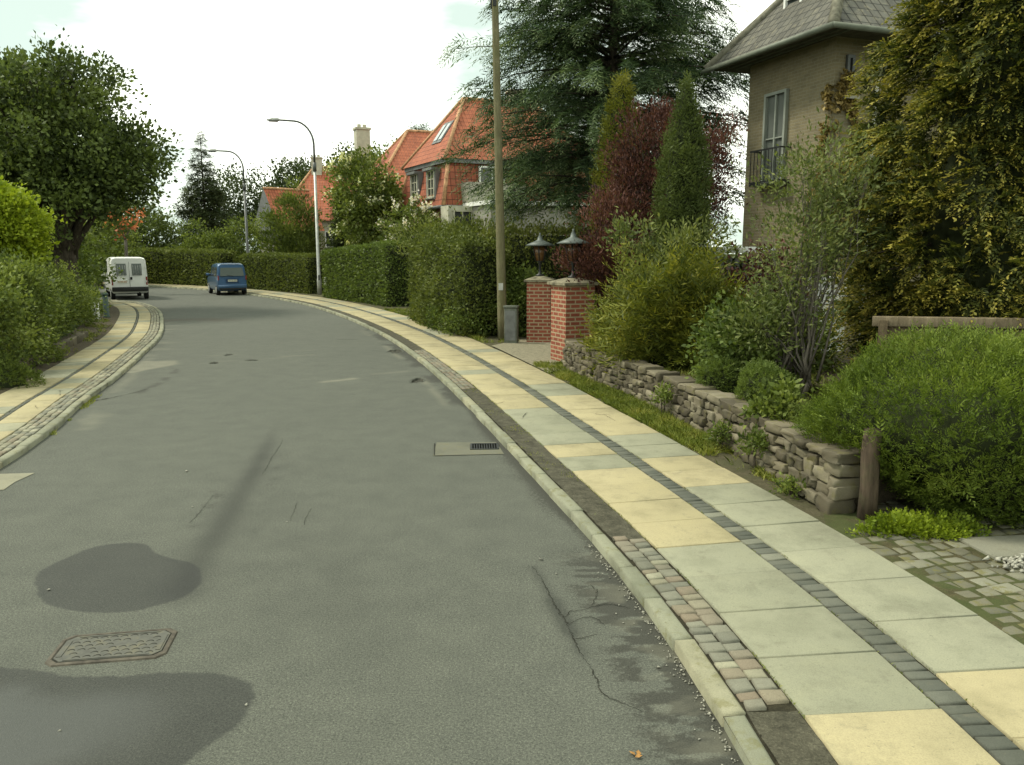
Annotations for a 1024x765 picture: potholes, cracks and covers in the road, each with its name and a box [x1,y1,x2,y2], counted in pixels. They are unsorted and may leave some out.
manhole cover [44,628,178,667]
crack [537,574,641,711]
